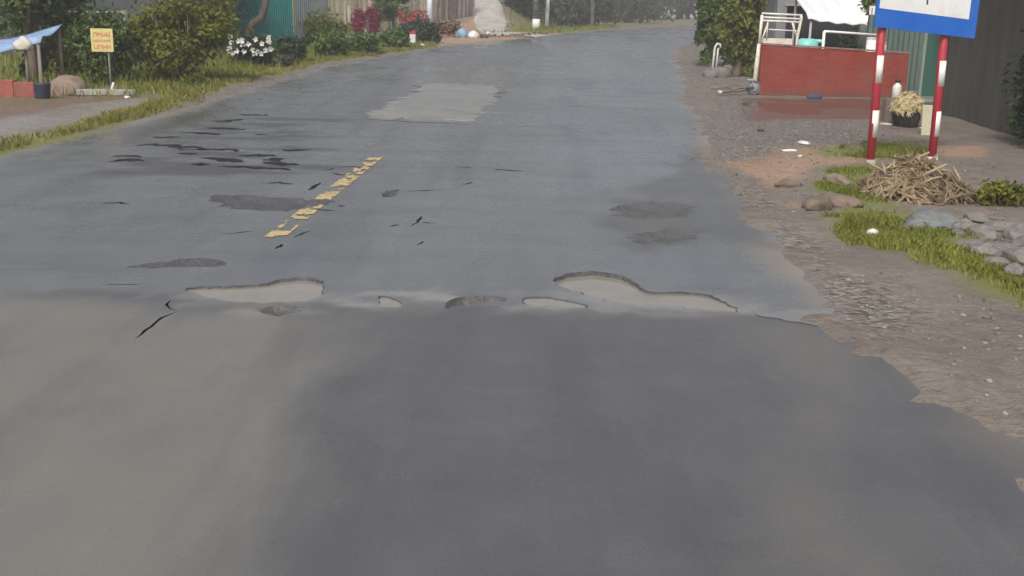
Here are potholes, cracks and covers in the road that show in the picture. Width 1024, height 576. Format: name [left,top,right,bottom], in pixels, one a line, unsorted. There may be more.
pothole [522,296,588,308]
pothole [553,271,738,312]
crack [417,167,518,191]
pothole [445,296,507,309]
crack [135,300,177,339]
crack [108,114,310,184]
pothole [186,277,325,303]
pothole [378,296,402,308]
